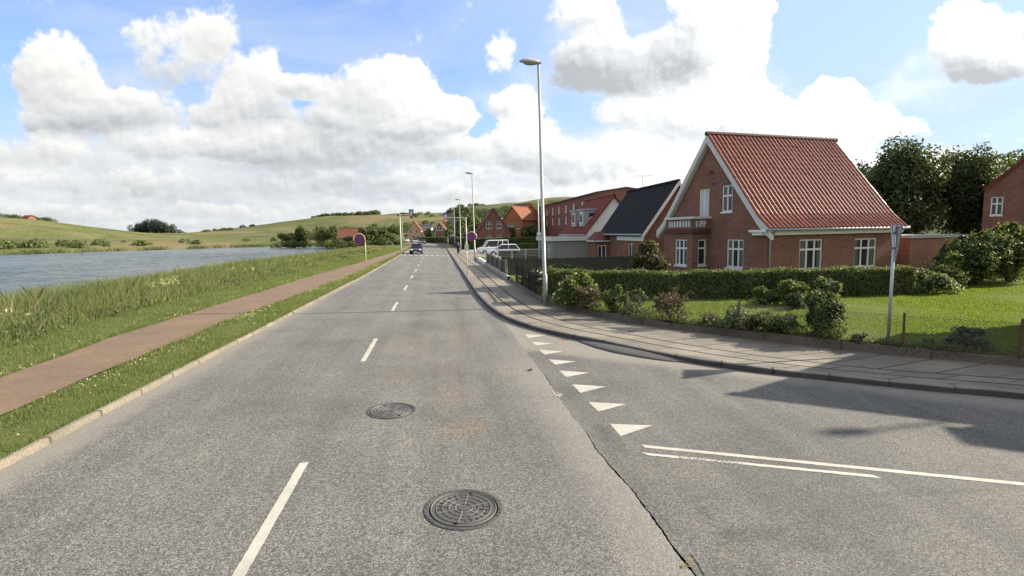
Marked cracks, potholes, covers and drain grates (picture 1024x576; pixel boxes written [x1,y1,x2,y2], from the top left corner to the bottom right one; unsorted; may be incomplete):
manhole cover [367,402,416,419]
manhole cover [424,489,503,531]
